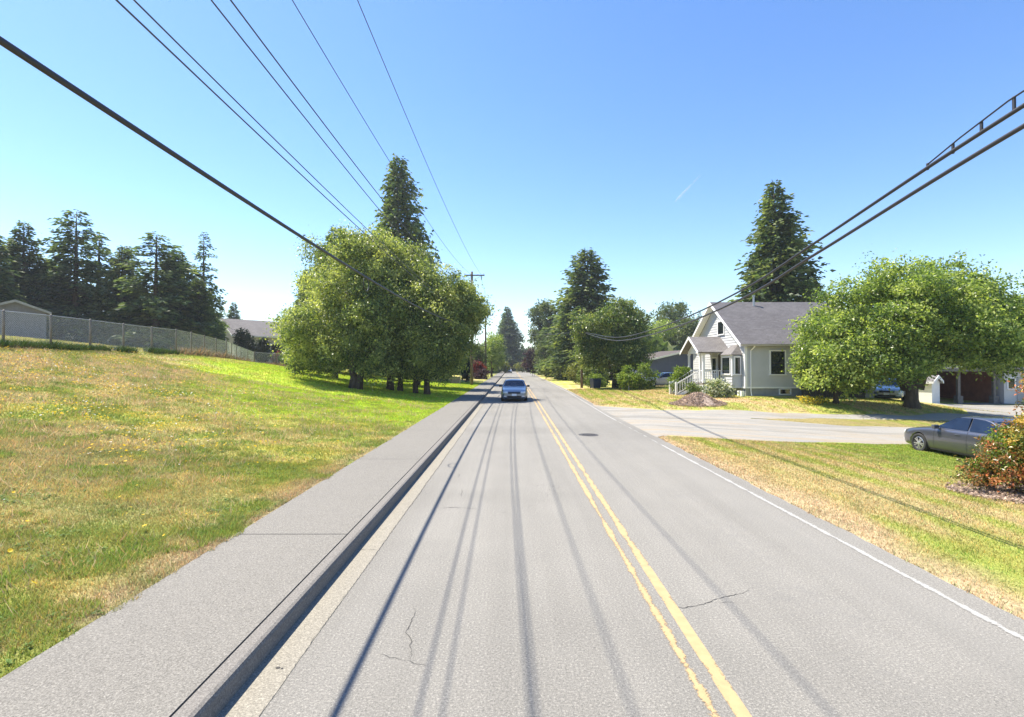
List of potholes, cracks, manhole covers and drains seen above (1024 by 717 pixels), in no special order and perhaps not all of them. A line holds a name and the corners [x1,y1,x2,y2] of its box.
crack [384,607,424,665]
